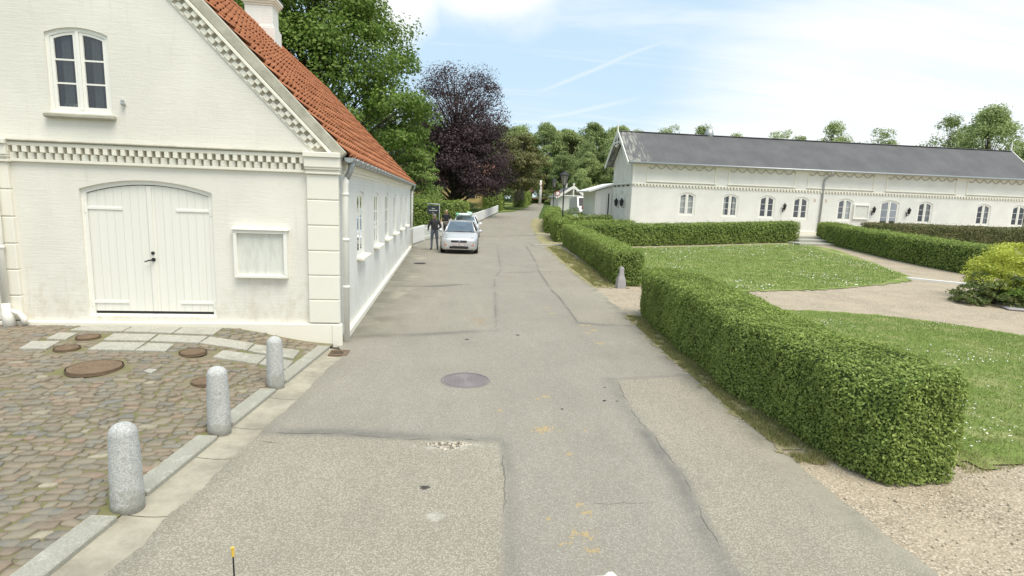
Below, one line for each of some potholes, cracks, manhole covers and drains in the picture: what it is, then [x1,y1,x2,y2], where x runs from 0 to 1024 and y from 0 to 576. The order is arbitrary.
manhole cover [441,372,490,388]
manhole cover [190,377,206,388]
pothole [426,441,472,450]
manhole cover [178,348,207,357]
manhole cover [52,344,81,353]
manhole cover [64,359,124,377]
